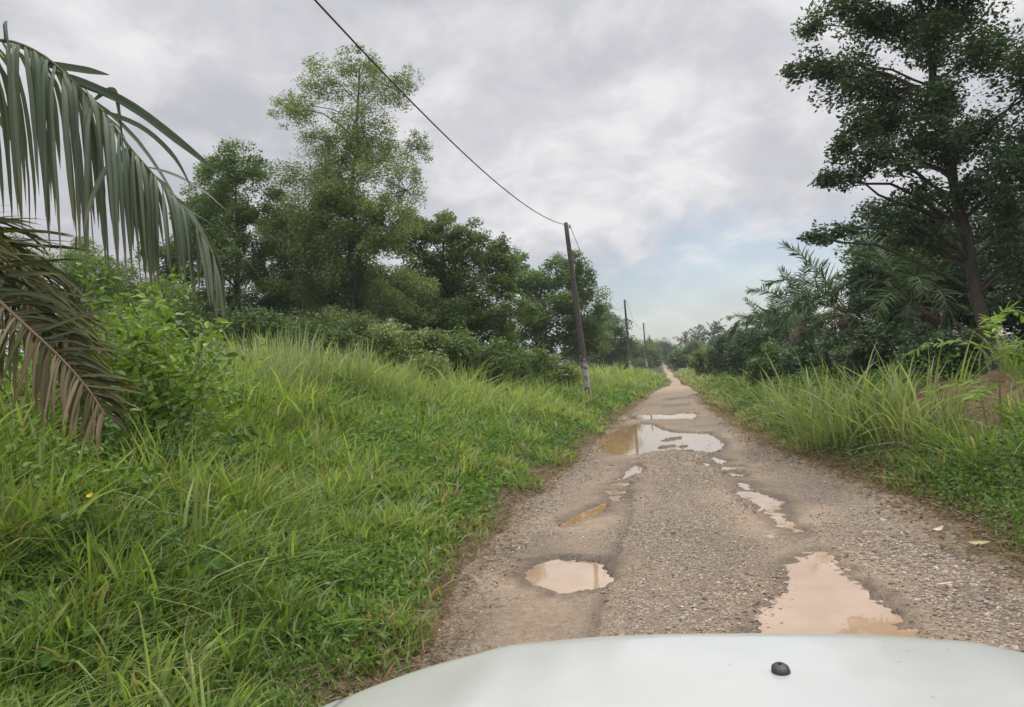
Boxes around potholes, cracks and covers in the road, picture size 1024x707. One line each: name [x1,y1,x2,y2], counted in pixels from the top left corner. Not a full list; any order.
pothole [557,499,612,525]
pothole [732,545,947,640]
pothole [616,462,646,480]
pothole [625,412,701,420]
pothole [727,479,819,538]
pothole [595,422,732,455]
pothole [514,553,622,596]
